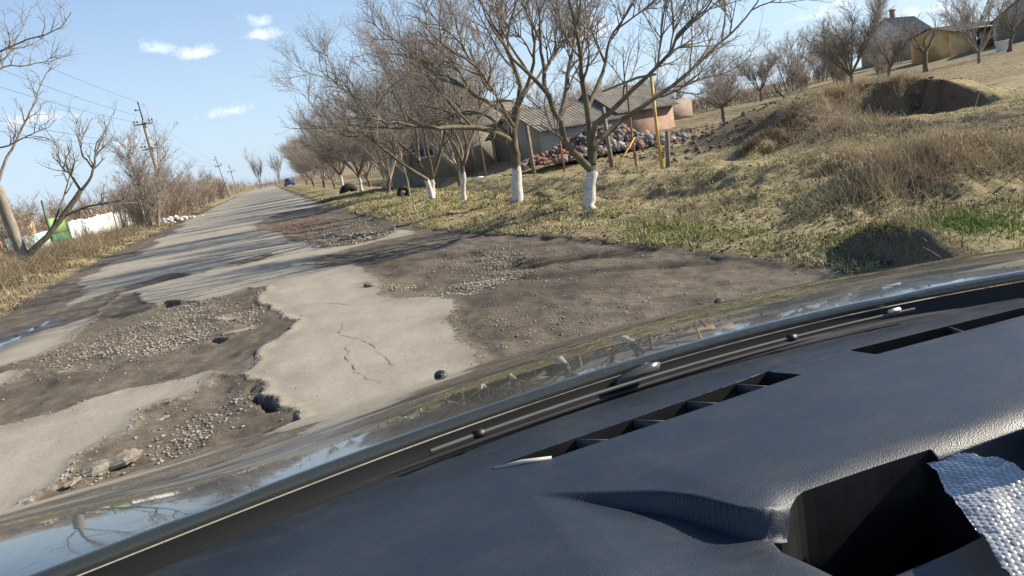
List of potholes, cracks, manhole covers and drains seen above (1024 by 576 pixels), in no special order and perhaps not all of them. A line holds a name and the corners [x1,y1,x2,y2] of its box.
pothole [0,288,295,426]
pothole [388,249,557,297]
crack [335,322,394,383]
pothole [27,374,299,504]
